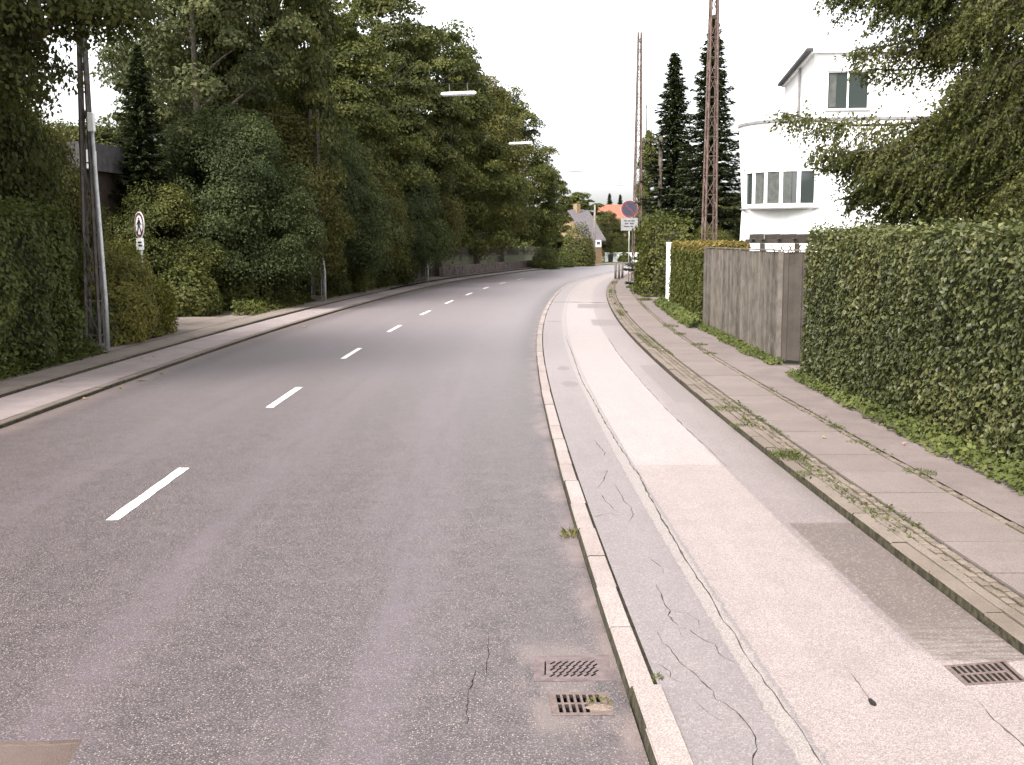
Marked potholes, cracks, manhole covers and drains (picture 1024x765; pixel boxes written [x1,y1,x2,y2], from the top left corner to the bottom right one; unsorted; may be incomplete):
crack [978,701,1024,746]
drain grate [944,660,1024,685]
crack [565,336,823,765]
drain grate [548,692,615,716]
crack [466,633,490,723]
